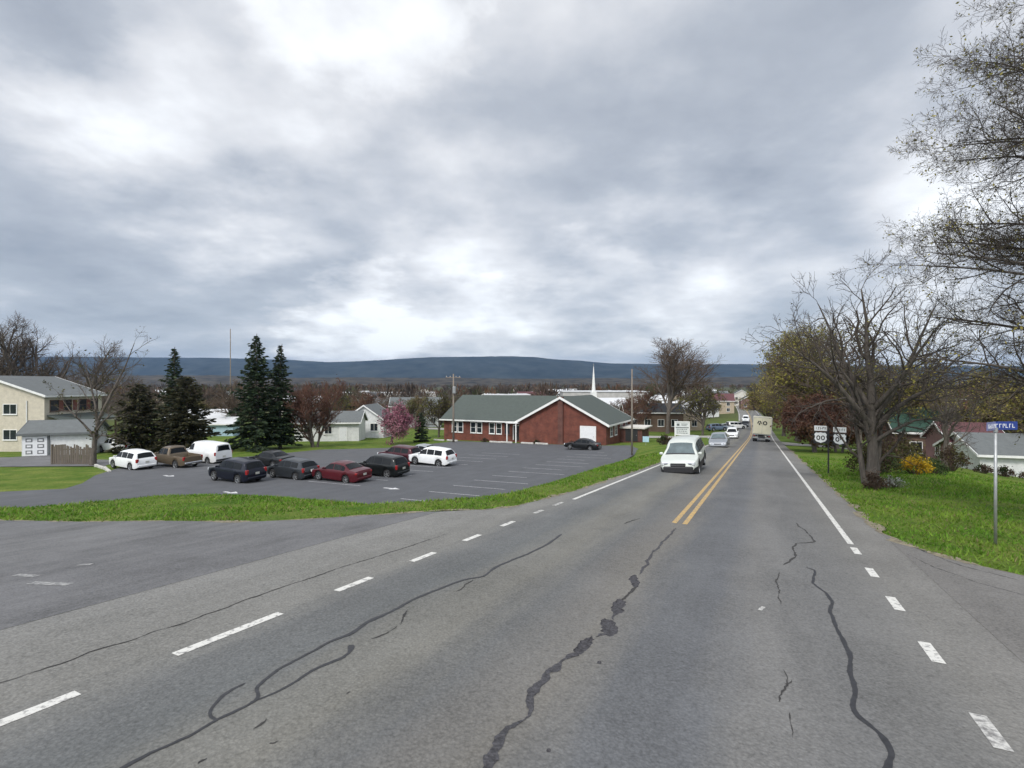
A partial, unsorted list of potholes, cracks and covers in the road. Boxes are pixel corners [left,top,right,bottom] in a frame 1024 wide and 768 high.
crack [779,669,794,737]
crack [775,523,816,602]
crack [483,652,579,768]
crack [596,518,676,637]
